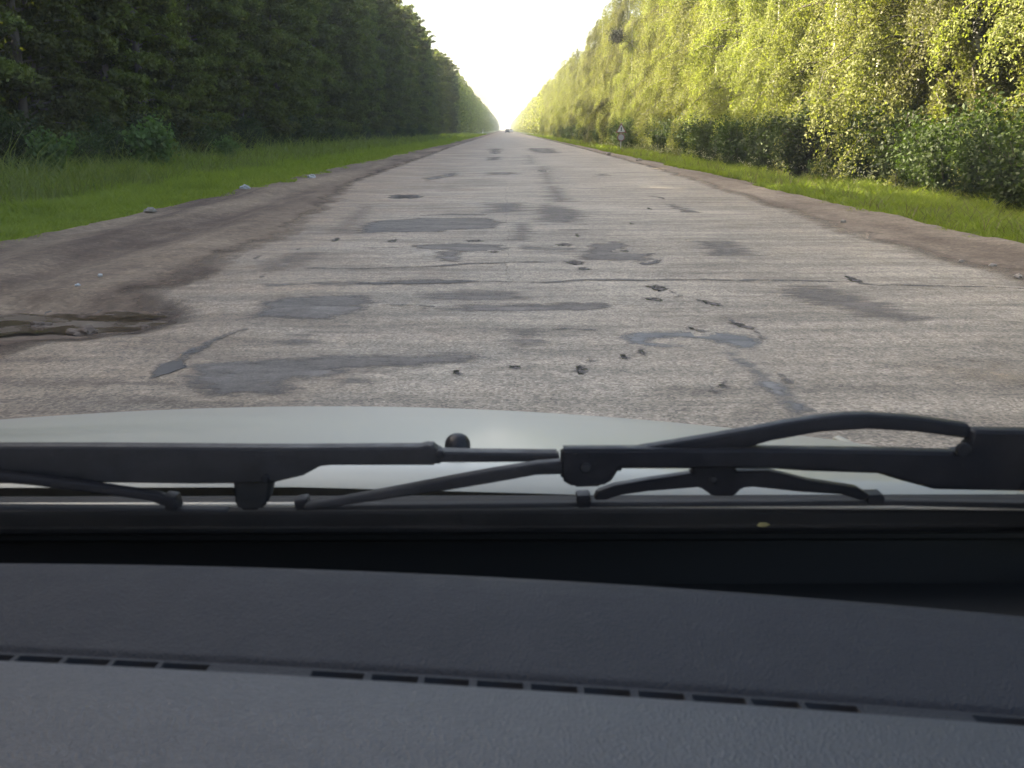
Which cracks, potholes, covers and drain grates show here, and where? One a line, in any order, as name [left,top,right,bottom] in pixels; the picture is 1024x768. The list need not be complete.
crack [333,253,835,297]
